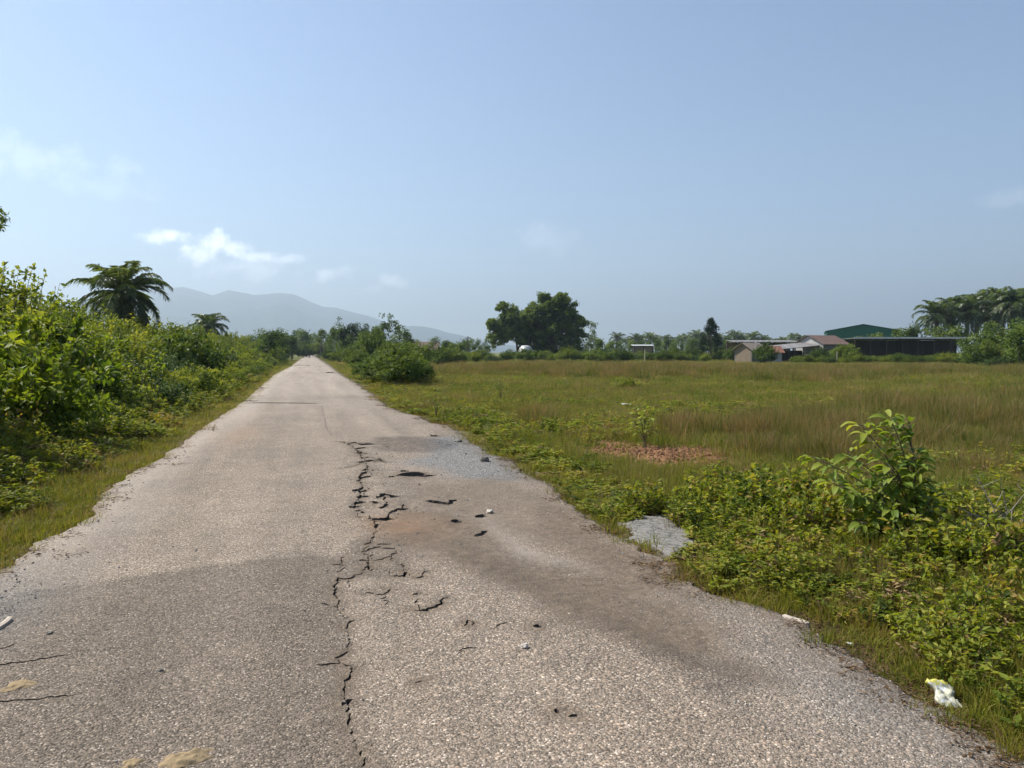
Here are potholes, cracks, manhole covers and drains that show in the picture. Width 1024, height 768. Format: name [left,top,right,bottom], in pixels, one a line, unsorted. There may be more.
crack [317,441,448,767]
